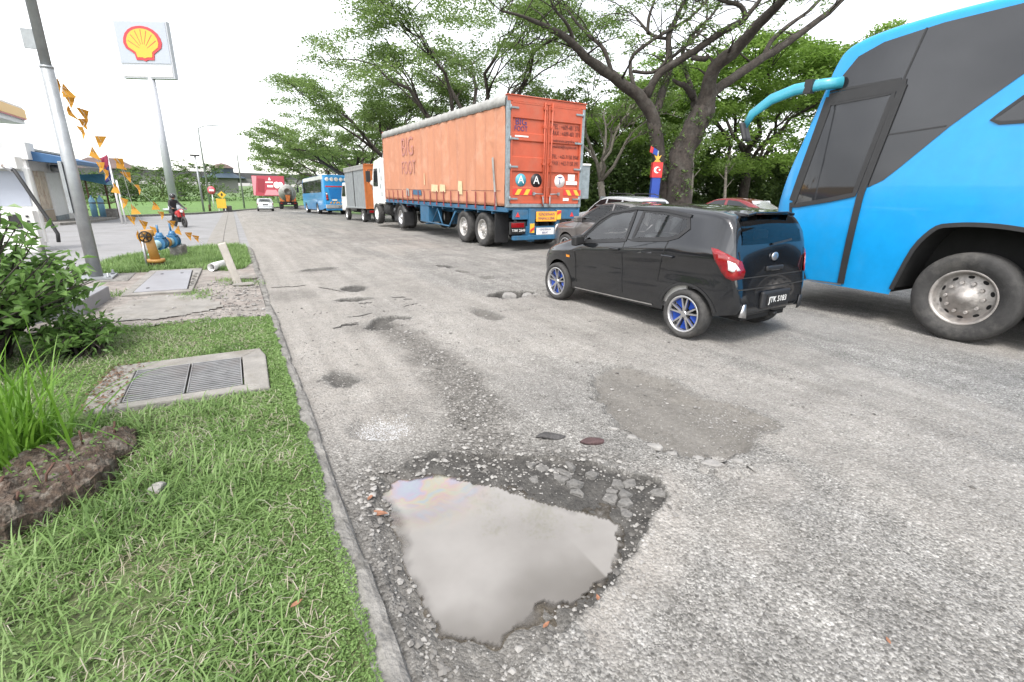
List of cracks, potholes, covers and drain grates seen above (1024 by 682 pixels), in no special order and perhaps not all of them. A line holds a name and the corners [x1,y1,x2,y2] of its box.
pothole [352,446,683,682]
pothole [311,369,371,392]
pothole [356,314,419,334]
pothole [482,290,541,300]
drain grate [83,348,270,416]
pothole [466,308,510,322]
pothole [337,284,371,294]
manhole cover [121,268,203,297]
